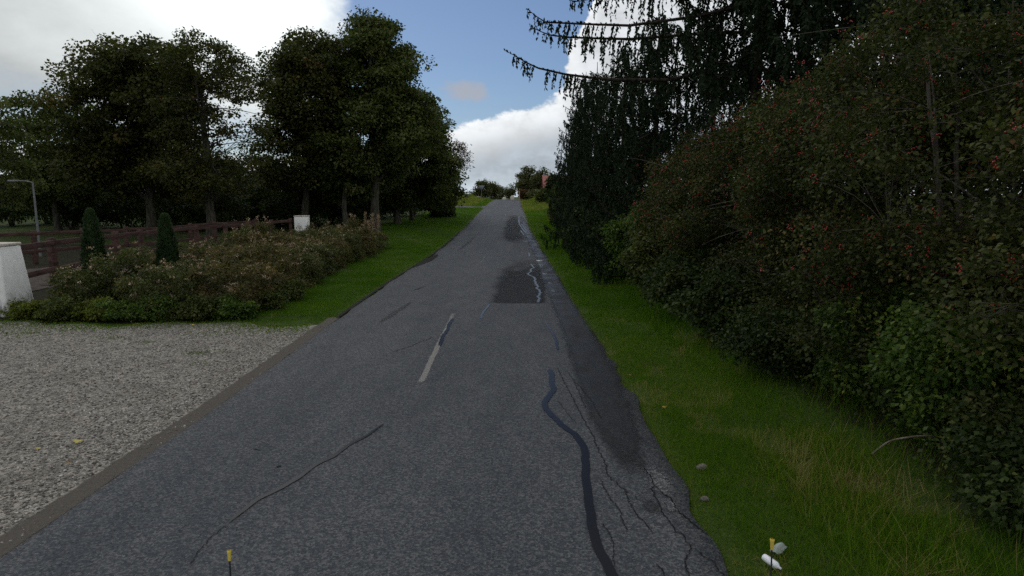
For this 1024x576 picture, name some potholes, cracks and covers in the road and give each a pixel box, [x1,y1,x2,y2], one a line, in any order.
crack [558,370,725,576]
